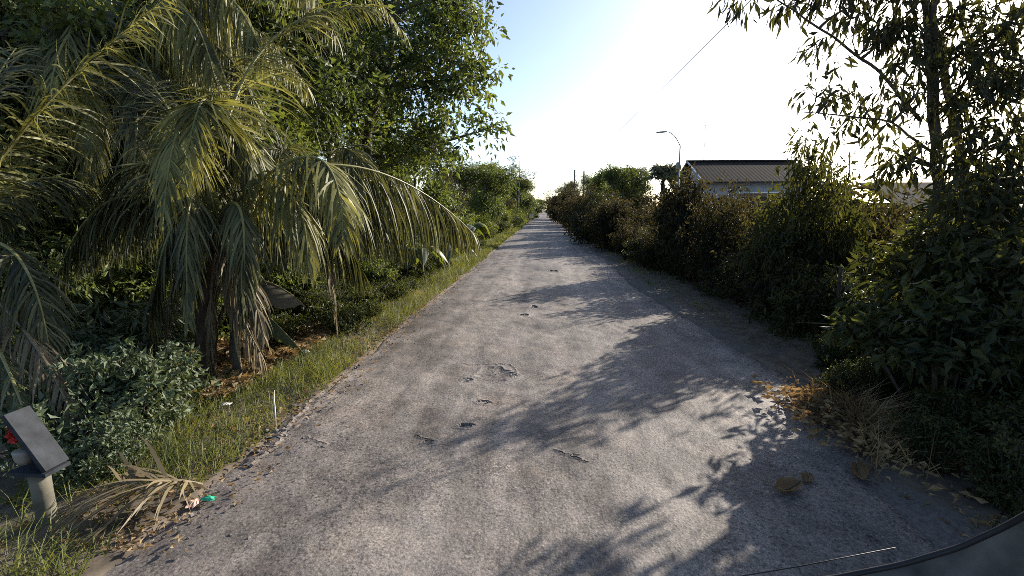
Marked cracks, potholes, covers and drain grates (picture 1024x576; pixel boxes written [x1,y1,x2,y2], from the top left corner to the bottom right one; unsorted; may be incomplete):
pothole [418,438,440,447]
pothole [472,398,497,406]
pothole [470,365,524,382]
pothole [450,421,481,430]
